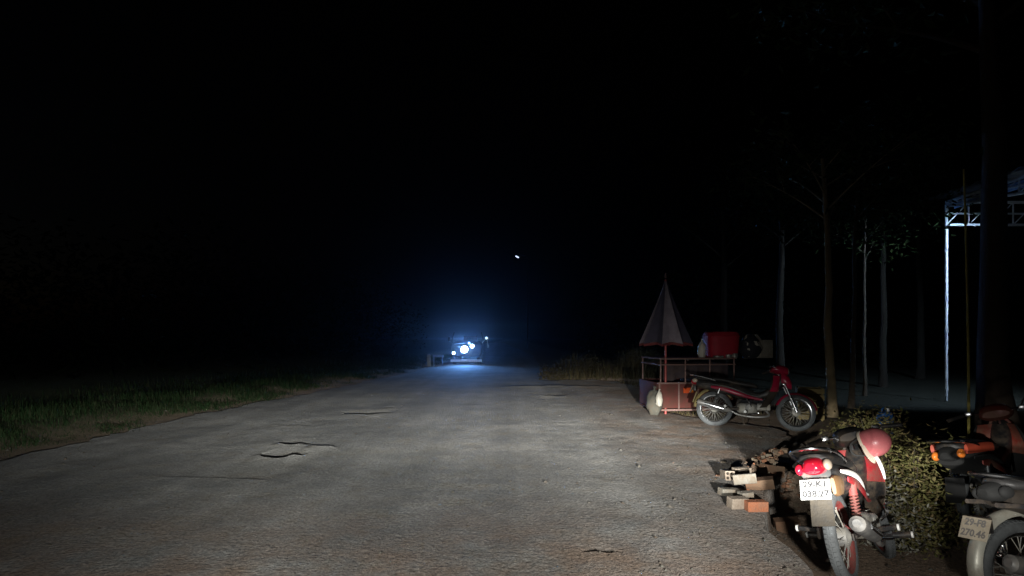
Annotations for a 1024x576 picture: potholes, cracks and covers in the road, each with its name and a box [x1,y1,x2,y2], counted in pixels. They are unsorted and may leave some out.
pothole [257,446,312,458]
